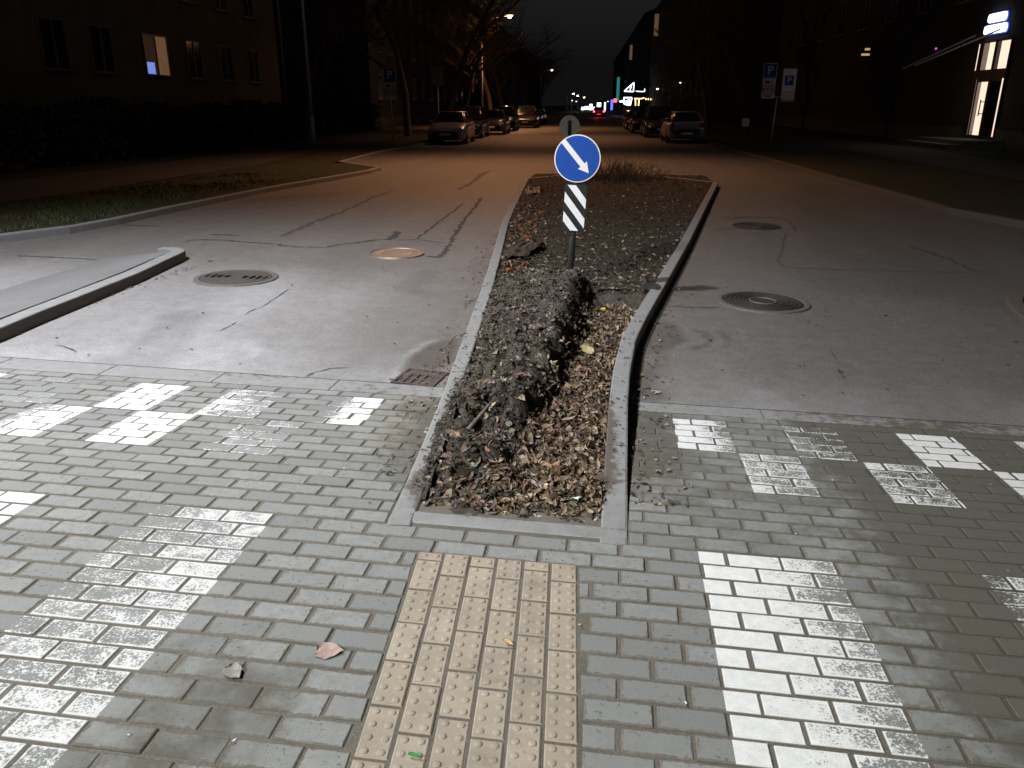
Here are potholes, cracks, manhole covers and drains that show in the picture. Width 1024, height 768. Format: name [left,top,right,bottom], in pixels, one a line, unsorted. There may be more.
manhole cover [193,269,279,287]
crack [459,171,491,189]
manhole cover [716,290,811,314]
crack [183,191,392,248]
drain grate [389,368,449,387]
crack [909,246,980,272]
manhole cover [732,222,781,230]
manhole cover [369,248,424,259]
